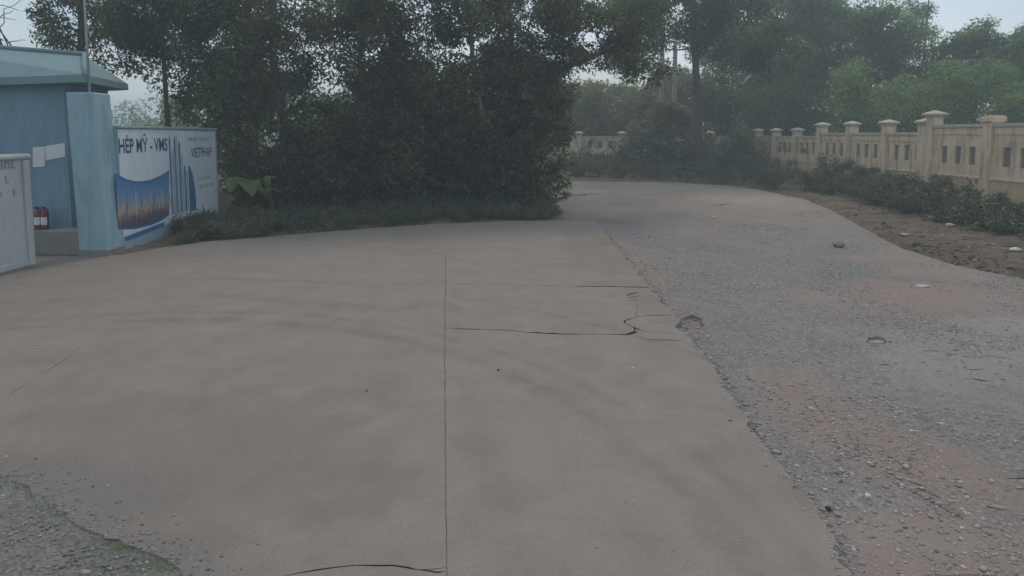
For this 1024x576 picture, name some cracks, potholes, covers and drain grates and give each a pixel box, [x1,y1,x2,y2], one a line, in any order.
pothole [681,315,704,332]
pothole [866,336,887,347]
crack [287,565,443,576]
crack [470,292,651,340]
